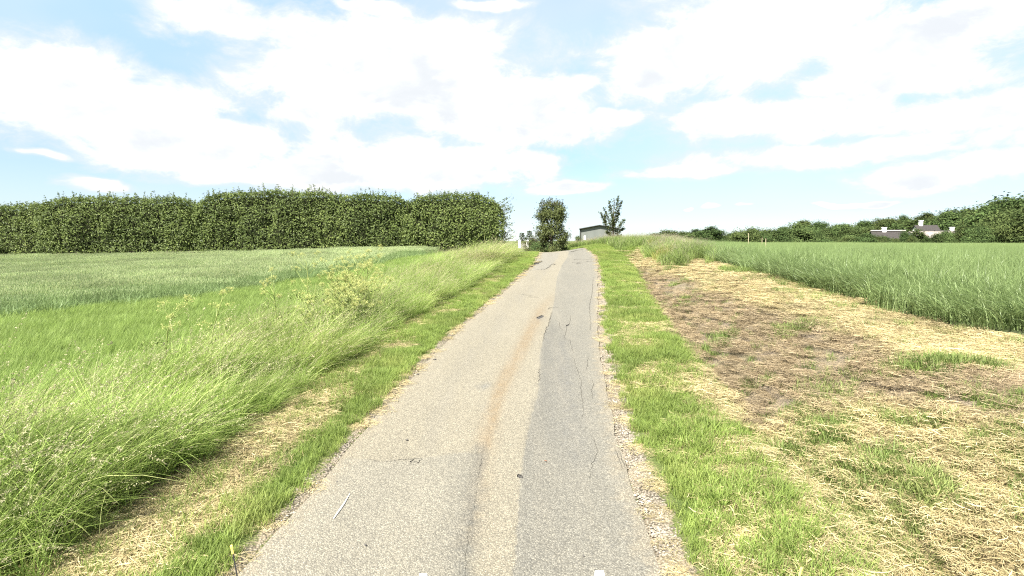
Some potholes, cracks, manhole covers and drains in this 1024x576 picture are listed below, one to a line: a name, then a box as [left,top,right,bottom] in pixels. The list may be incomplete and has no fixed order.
crack [543,307,594,417]
